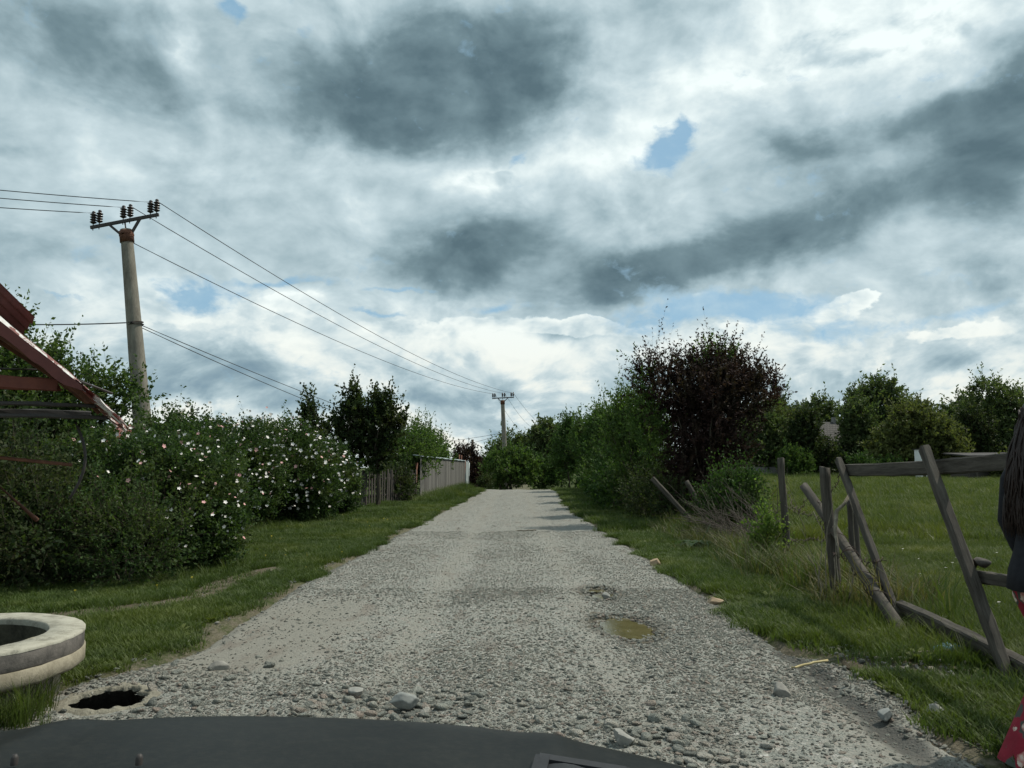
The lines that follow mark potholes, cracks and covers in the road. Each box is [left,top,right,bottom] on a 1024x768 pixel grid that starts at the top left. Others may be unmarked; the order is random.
pothole [586,611,670,645]
pothole [579,585,623,599]
pothole [51,682,161,716]
